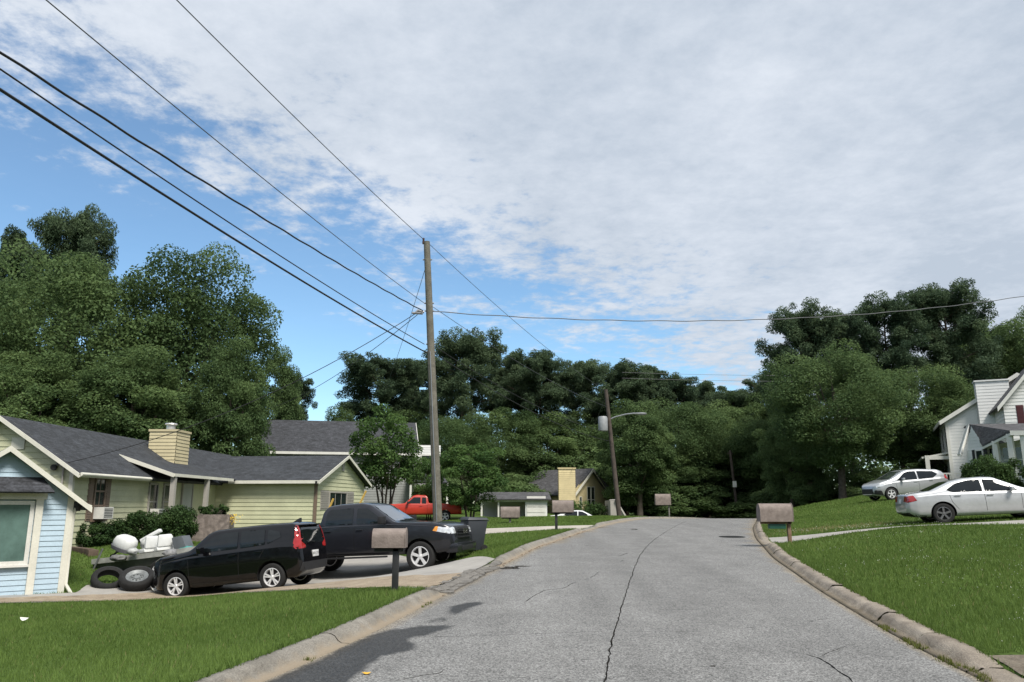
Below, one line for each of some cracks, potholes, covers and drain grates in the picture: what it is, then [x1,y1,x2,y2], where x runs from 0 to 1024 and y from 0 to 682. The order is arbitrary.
crack [806,645,853,682]
